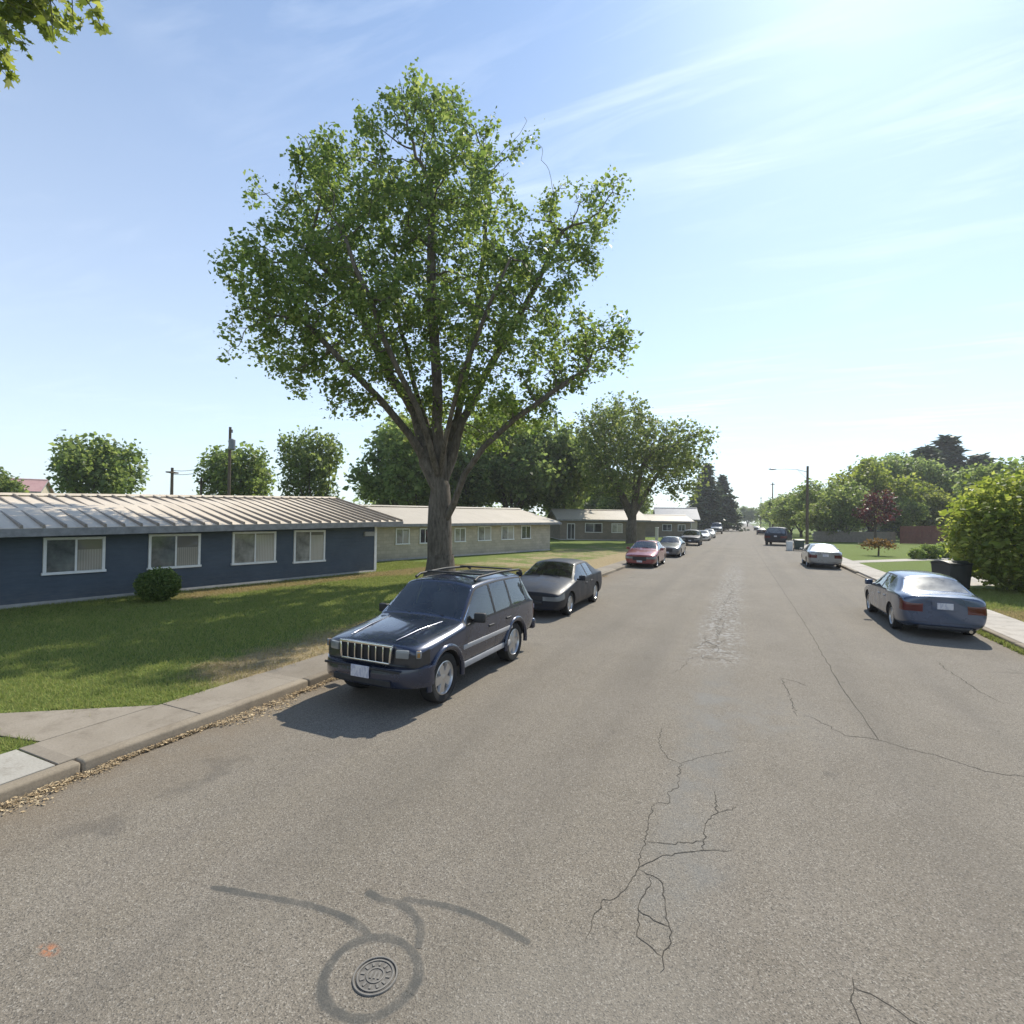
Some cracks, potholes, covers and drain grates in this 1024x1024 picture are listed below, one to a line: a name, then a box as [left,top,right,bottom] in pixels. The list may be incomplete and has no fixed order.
manhole cover [352,956,398,997]
crack [850,977,917,1024]
crack [585,725,736,968]
crack [782,678,1020,776]
